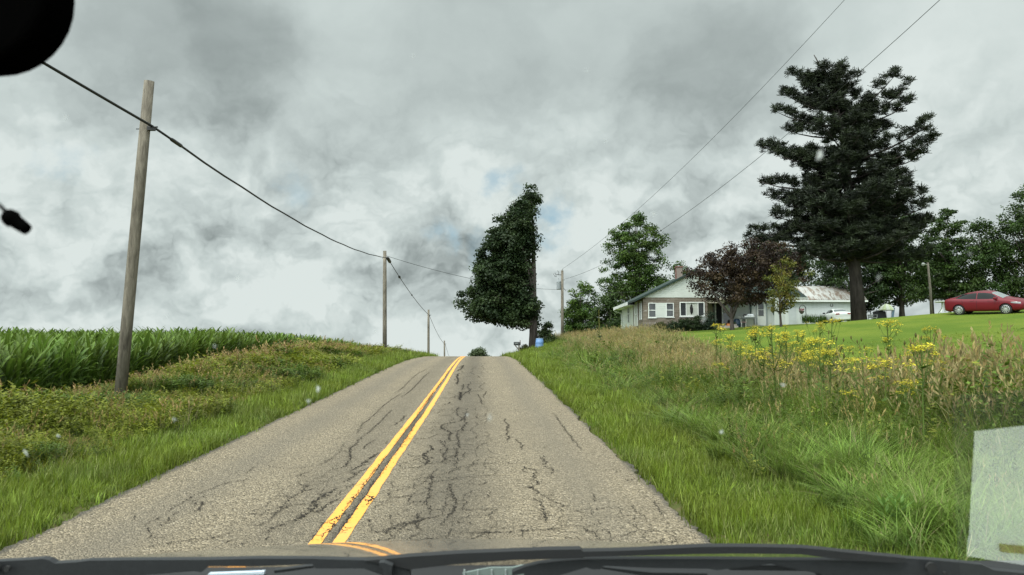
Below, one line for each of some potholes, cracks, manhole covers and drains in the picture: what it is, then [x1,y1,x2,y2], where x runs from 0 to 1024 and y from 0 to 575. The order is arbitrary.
crack [133,467,254,547]
crack [249,365,681,543]
